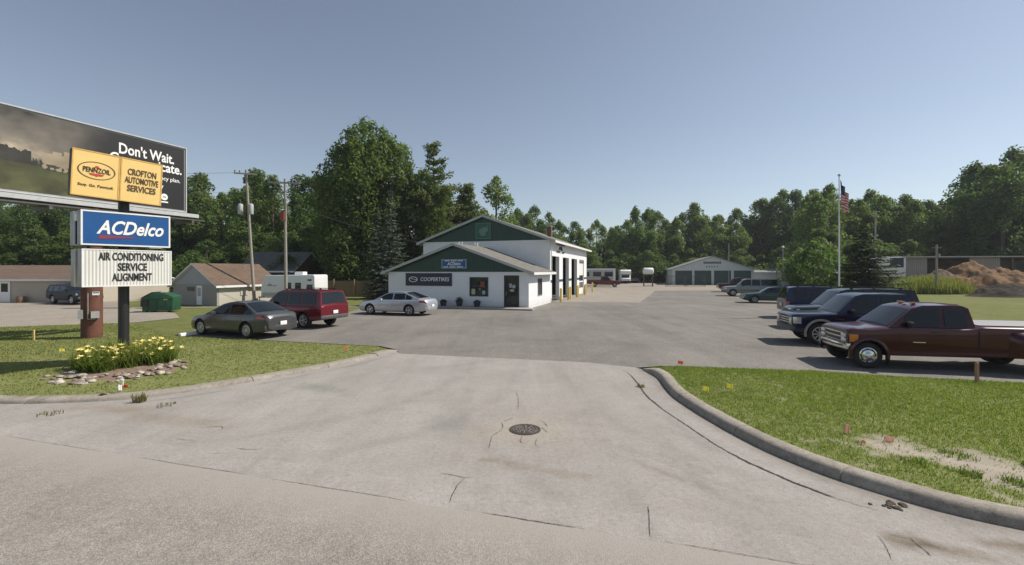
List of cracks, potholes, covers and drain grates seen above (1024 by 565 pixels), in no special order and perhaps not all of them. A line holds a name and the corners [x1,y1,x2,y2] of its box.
manhole cover [509,424,541,435]
